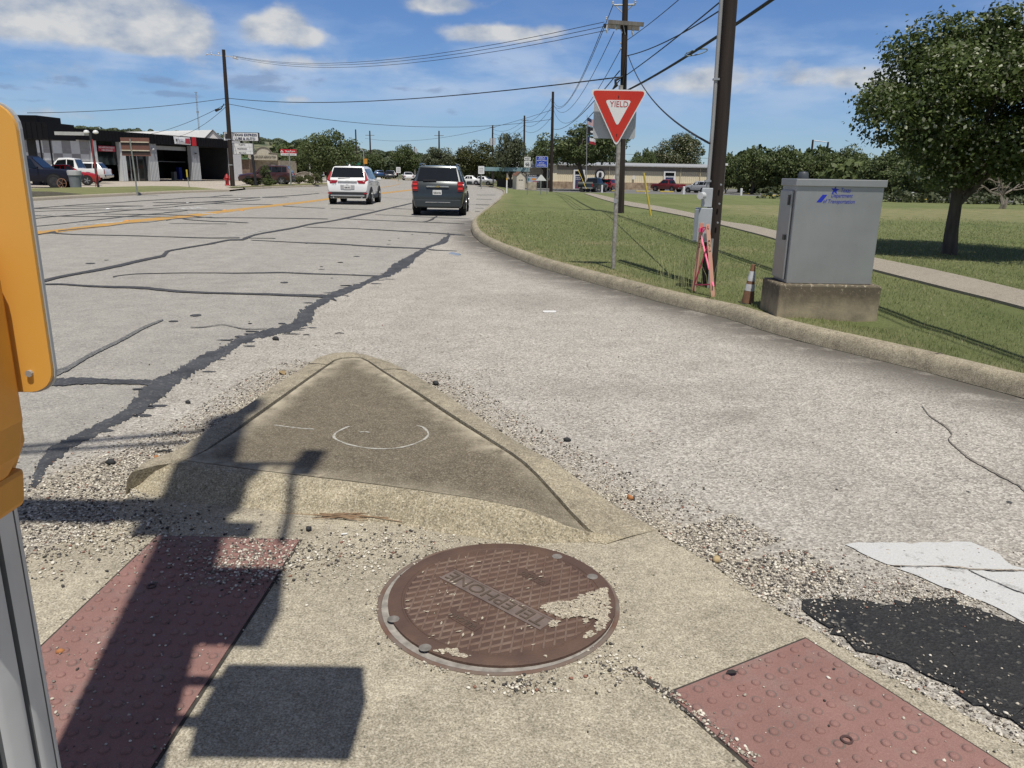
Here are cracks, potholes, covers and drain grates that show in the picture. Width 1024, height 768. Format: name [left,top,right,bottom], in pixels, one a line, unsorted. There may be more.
manhole cover [377,543,620,676]
crack [922,406,1024,490]
